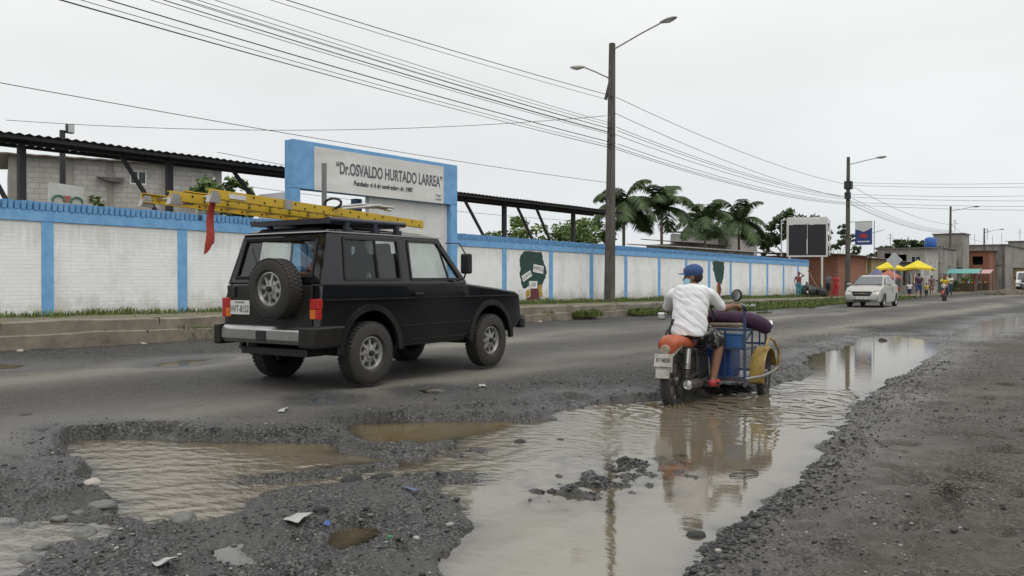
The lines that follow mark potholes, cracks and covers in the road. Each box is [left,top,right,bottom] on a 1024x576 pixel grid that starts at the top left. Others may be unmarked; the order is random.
pothole [403,334,950,576]
pothole [141,357,223,368]
pothole [325,408,522,447]
pothole [42,422,441,528]
